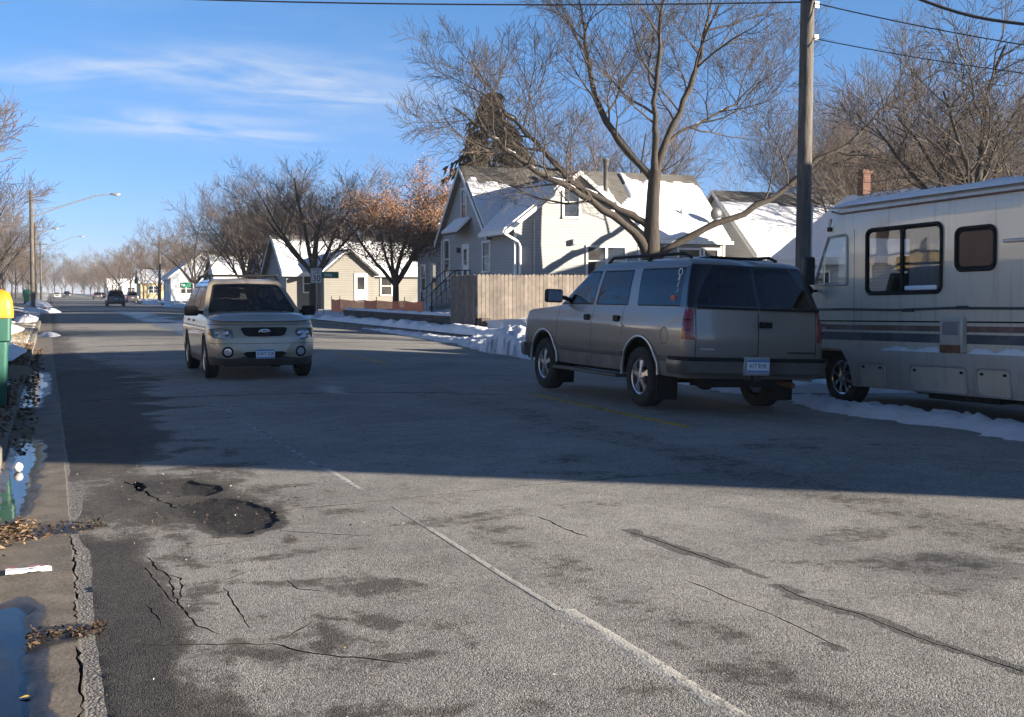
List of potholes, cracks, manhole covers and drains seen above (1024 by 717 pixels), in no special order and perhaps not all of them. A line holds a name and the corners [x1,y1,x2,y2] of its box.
crack [75,646,85,717]
crack [69,533,79,620]
pothole [178,498,280,535]
crack [141,540,413,665]
pothole [178,480,224,496]
crack [631,532,1023,672]
crack [124,481,176,508]
